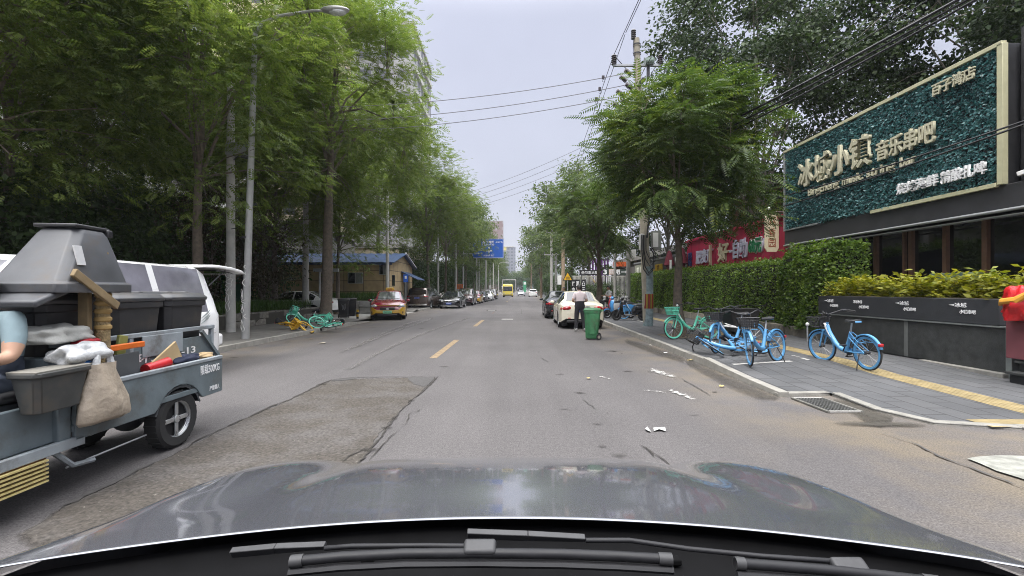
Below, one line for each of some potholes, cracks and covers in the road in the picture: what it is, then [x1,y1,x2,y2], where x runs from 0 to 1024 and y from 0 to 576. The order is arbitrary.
drain grate [791,397,864,413]
crack [187,376,437,464]
